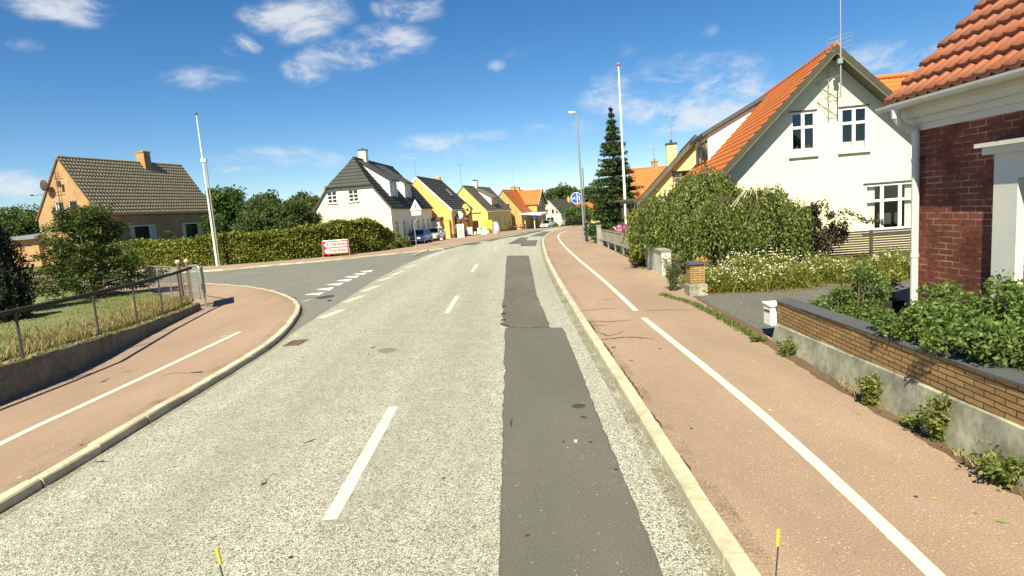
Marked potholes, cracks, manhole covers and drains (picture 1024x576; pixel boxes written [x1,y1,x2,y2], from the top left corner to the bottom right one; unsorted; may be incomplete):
crack [585,299,662,427]
